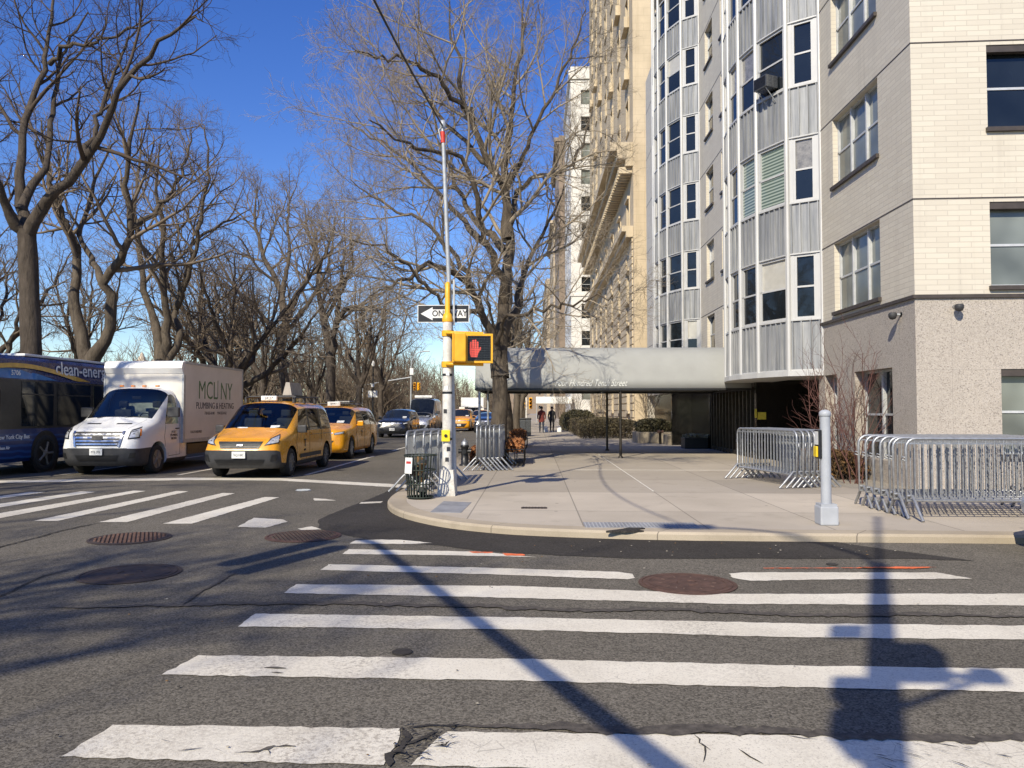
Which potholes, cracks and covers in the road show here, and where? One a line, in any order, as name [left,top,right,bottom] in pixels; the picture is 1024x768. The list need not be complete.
manhole cover [86,532,172,545]
manhole cover [265,530,342,542]
crack [162,739,293,754]
manhole cover [638,573,738,595]
manhole cover [74,564,183,585]
